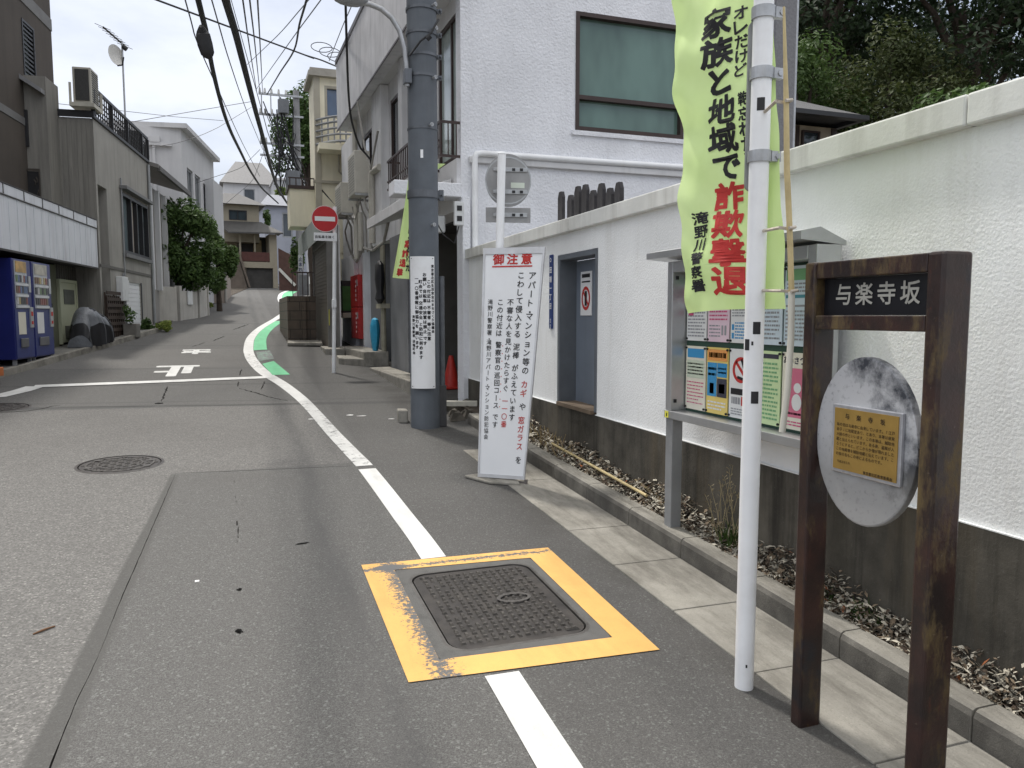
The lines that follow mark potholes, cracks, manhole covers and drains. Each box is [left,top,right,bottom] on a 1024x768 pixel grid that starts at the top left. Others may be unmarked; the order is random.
manhole cover [74,455,164,474]
manhole cover [396,558,610,659]
crack [120,369,287,407]
manhole cover [0,403,31,412]
crack [49,466,340,768]
